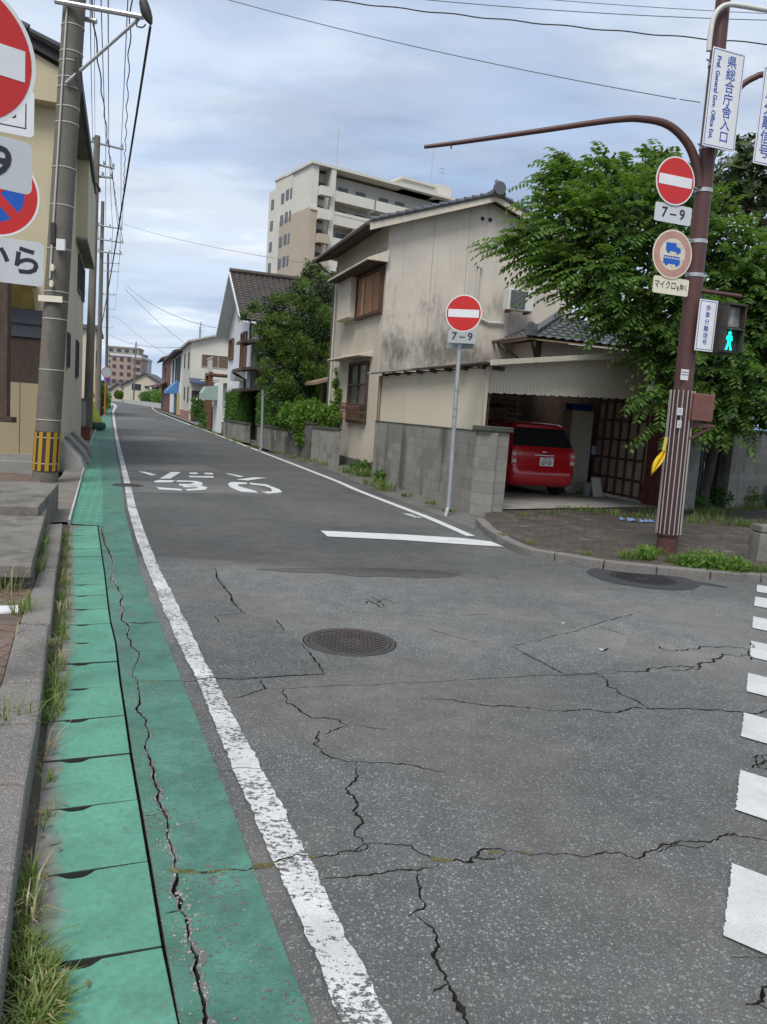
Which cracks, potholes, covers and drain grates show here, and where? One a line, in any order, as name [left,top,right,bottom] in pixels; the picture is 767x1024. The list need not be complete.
crack [100,527,767,1024]
manhole cover [303,628,396,657]
manhole cover [609,571,677,586]
